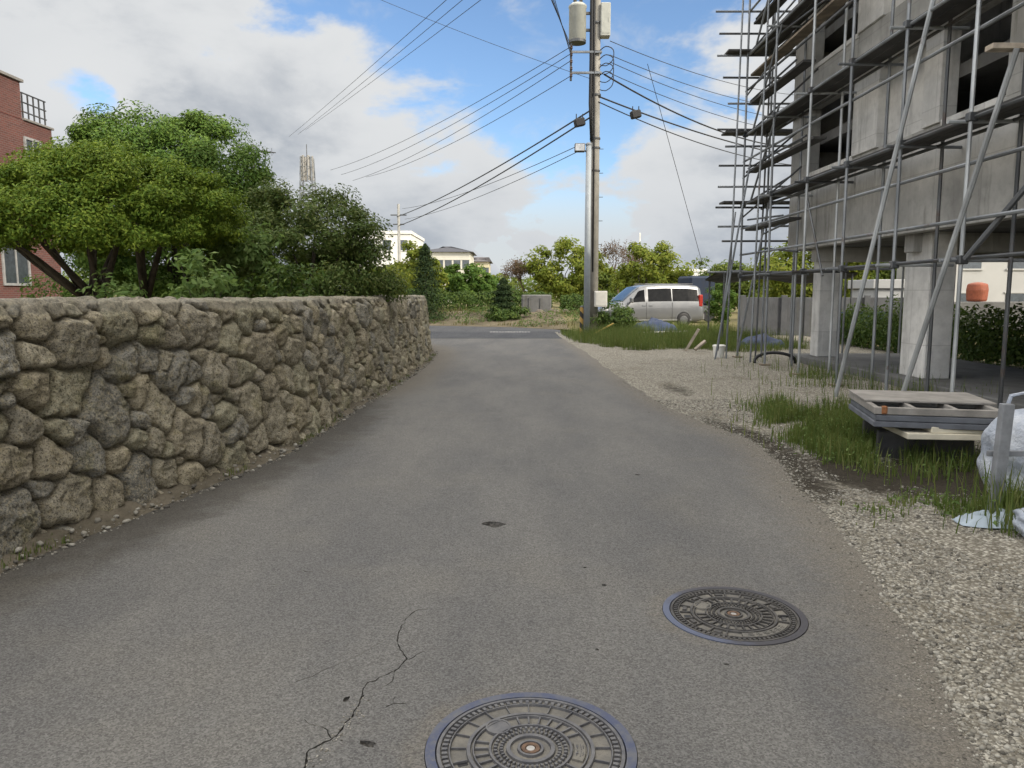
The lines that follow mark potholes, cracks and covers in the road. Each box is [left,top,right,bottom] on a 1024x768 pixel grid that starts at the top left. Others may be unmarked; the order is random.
manhole cover [662,586,809,646]
manhole cover [424,692,638,768]
crack [299,609,423,768]
